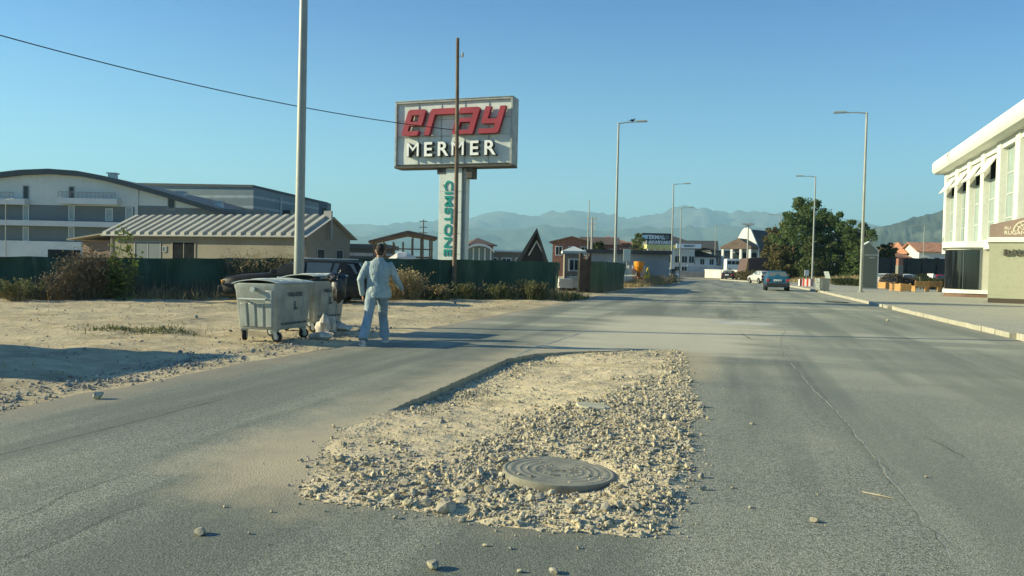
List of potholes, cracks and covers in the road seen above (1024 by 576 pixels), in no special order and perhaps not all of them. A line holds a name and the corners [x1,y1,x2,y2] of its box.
manhole cover [502,457,615,495]
pothole [172,344,832,551]
